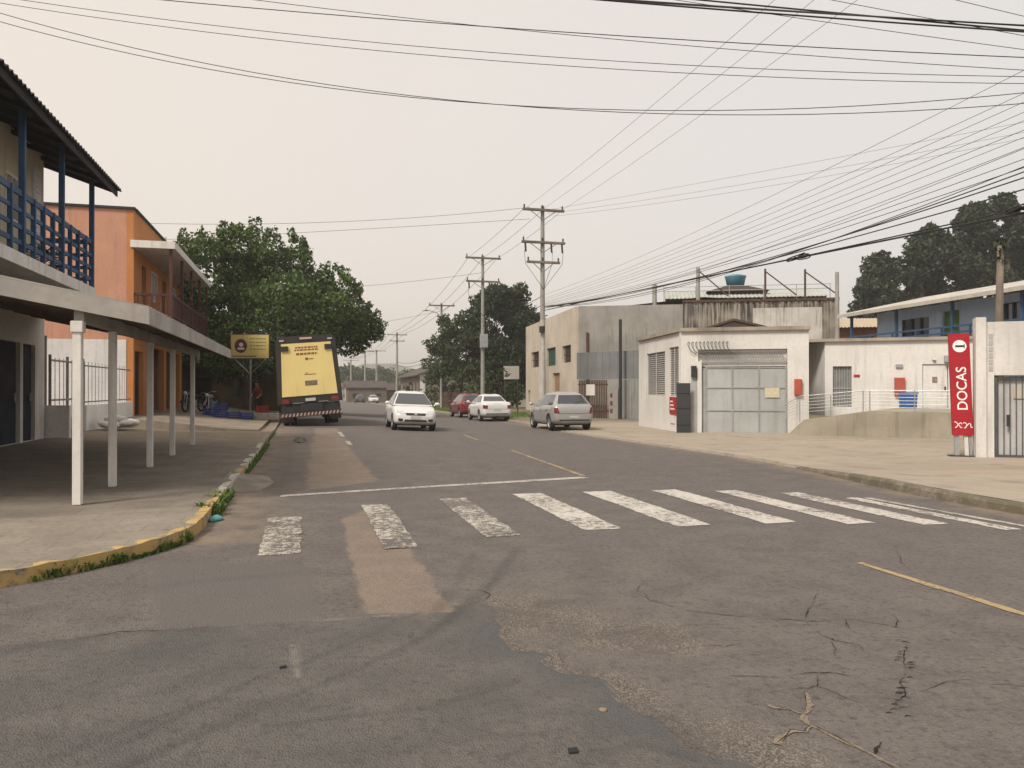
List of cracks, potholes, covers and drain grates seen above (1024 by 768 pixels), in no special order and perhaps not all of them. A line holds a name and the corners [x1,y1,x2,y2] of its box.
crack [728,615,1020,768]
crack [637,577,916,652]
